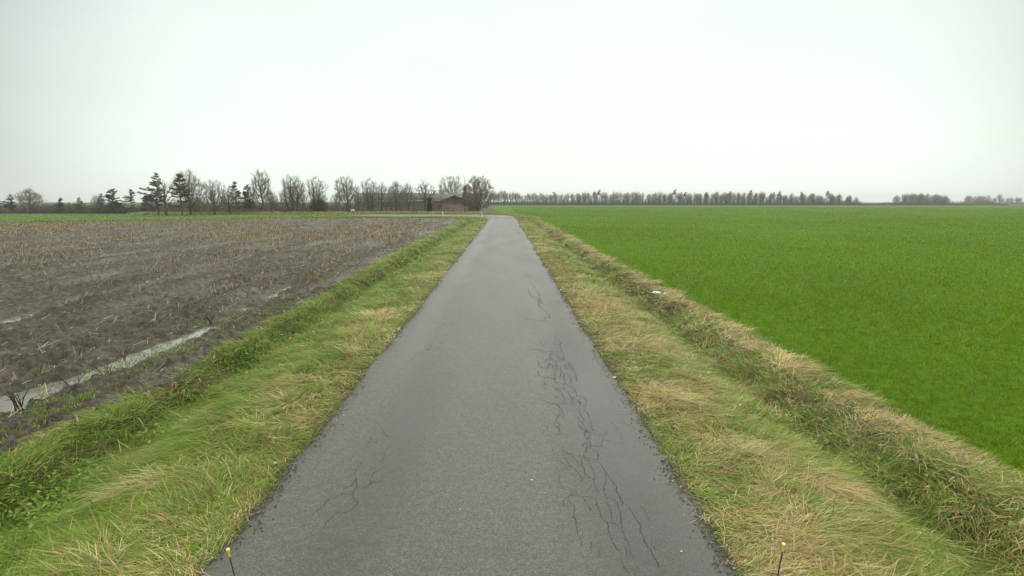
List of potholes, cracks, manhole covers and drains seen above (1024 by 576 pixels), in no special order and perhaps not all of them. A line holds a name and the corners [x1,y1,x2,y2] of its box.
crack [308,429,394,528]
crack [536,341,660,572]
